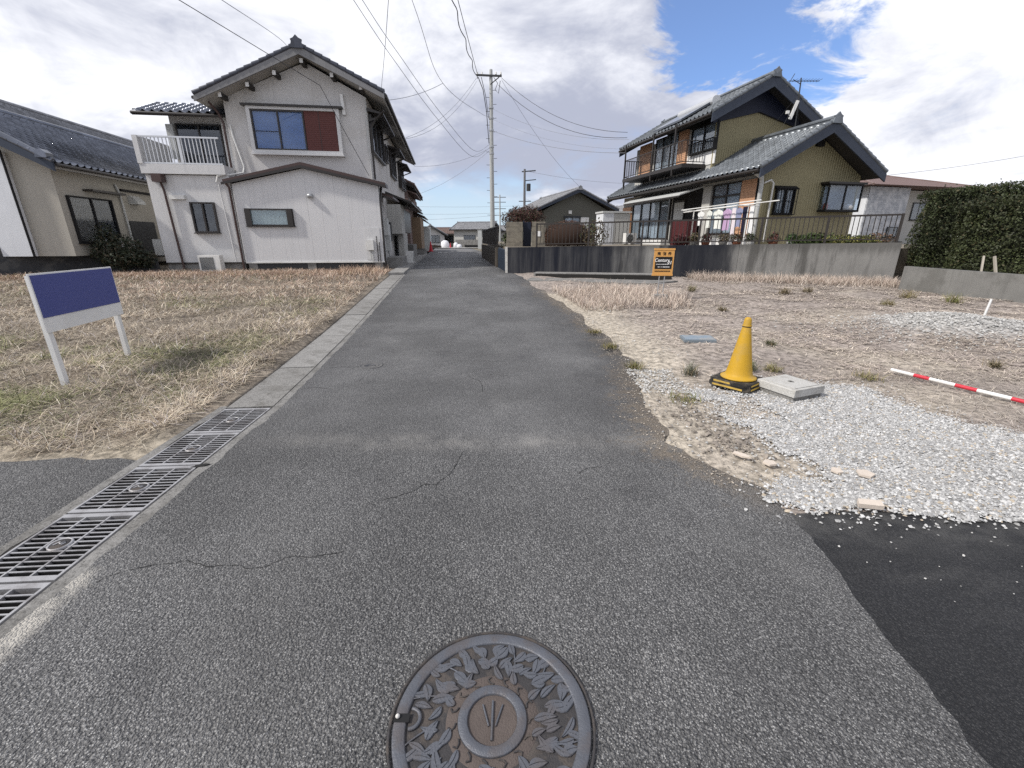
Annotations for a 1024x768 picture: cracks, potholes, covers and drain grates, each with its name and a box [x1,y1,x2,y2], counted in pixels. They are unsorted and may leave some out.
drain grate [0,512,140,585]
crack [90,548,349,586]
drain grate [0,582,52,626]
manhole cover [386,631,596,768]
drain grate [189,408,271,434]
drain grate [139,432,240,467]
drain grate [68,465,196,514]
